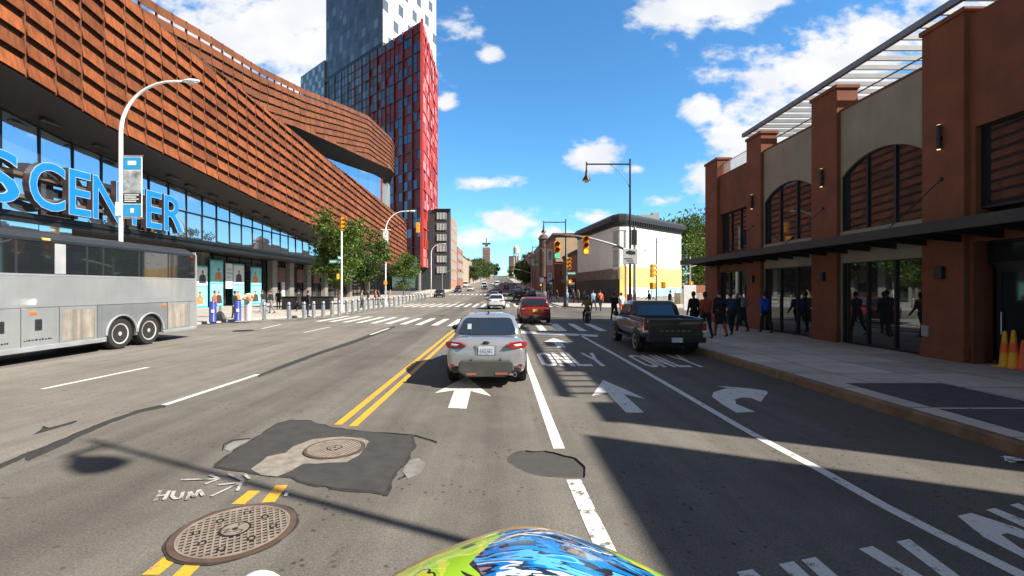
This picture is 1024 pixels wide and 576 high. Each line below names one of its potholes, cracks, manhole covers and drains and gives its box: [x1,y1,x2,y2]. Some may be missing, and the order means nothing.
manhole cover [162,503,299,565]
pothole [507,450,585,478]
manhole cover [302,439,365,460]
